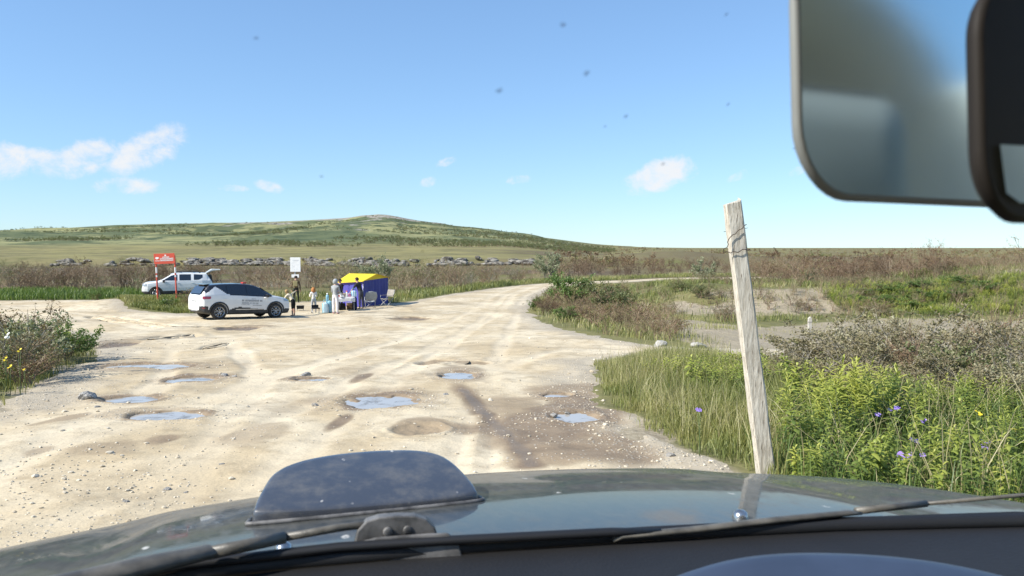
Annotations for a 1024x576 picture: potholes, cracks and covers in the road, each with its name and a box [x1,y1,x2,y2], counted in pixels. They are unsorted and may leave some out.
pothole [529,408,620,427]
pothole [279,375,345,383]
pothole [309,389,449,414]
pothole [370,418,467,440]
pothole [139,373,243,386]
pothole [424,368,490,382]
pothole [70,392,187,406]
pothole [64,361,230,371]
pothole [88,407,245,423]
pothole [528,391,585,399]
